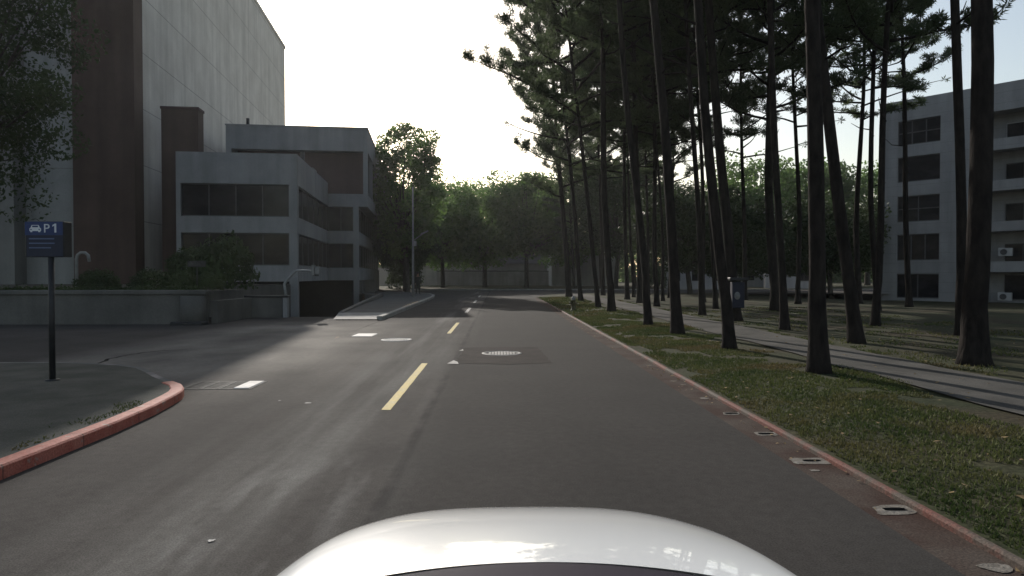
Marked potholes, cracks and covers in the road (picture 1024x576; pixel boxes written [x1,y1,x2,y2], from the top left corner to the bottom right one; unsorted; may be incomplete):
drain grate [872,505,916,515]
drain grate [184,381,268,390]
